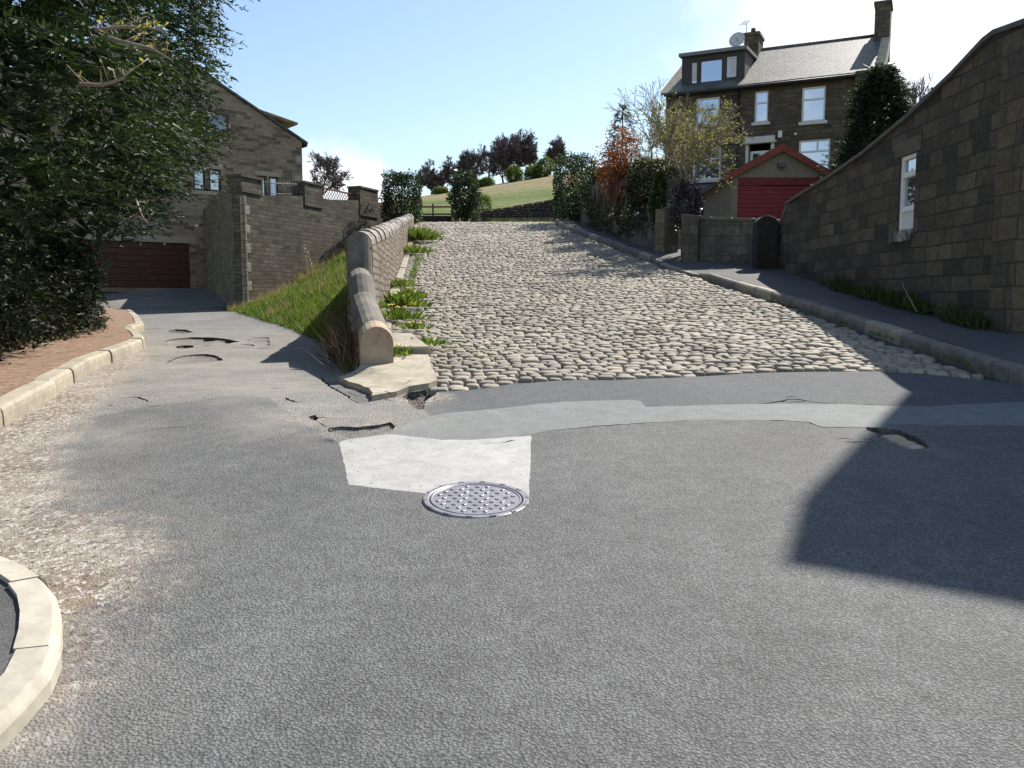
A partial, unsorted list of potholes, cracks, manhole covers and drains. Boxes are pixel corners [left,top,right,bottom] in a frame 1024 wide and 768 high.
crack [321,377,409,403]
manhole cover [423,481,529,518]
pothole [166,354,222,365]
pothole [165,337,238,349]
crack [761,396,878,447]
pothole [248,337,270,348]
pothole [866,427,929,449]
pothole [403,388,438,410]
